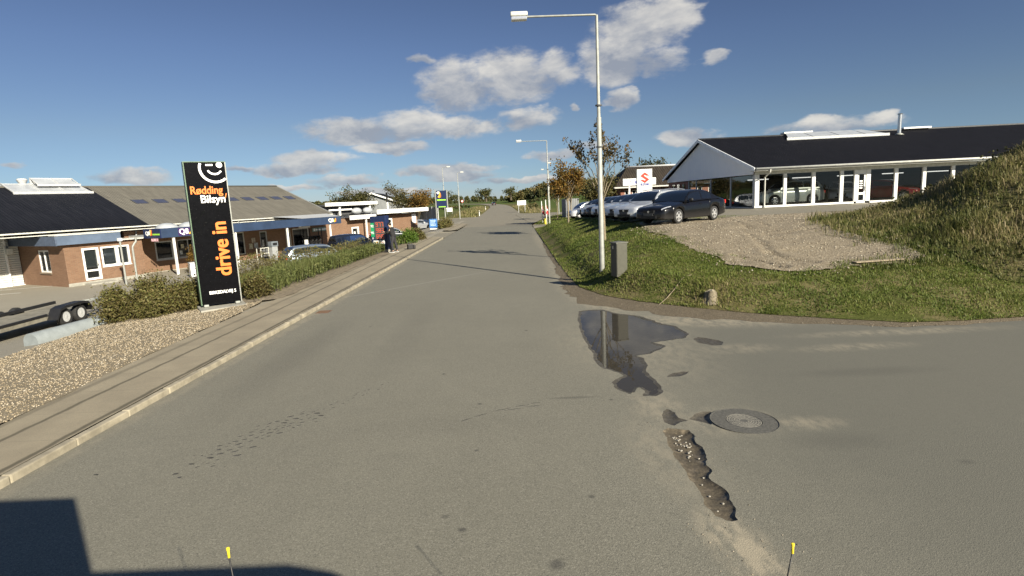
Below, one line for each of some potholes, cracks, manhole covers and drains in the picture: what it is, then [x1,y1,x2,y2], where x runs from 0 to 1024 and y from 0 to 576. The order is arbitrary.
pothole [663,428,738,521]
pothole [690,411,712,425]
manhole cover [710,408,779,434]
pothole [662,409,687,426]
